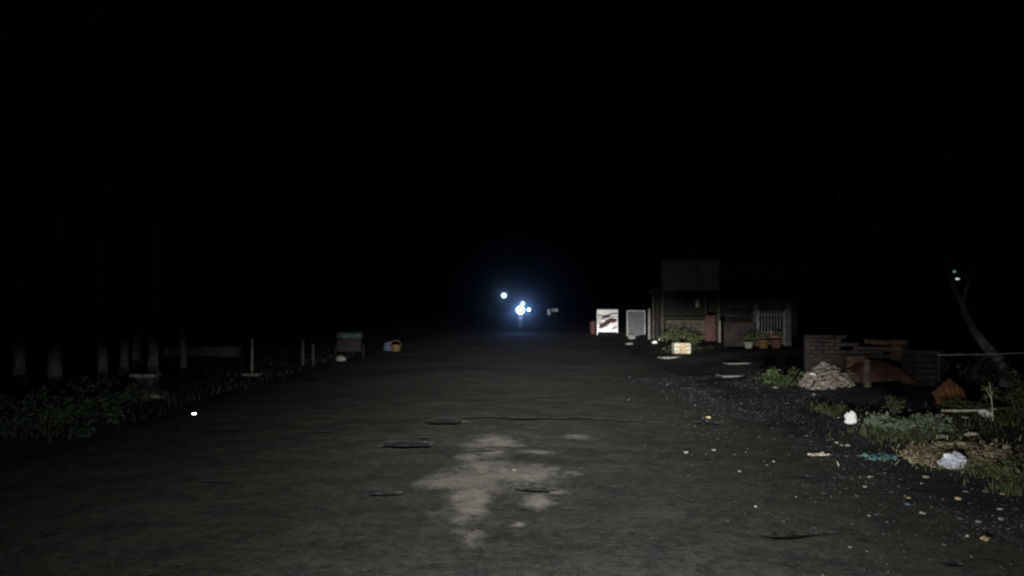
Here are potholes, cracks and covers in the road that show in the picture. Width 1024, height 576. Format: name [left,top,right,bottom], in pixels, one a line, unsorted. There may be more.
pothole [377,440,435,449]
crack [462,415,662,423]
